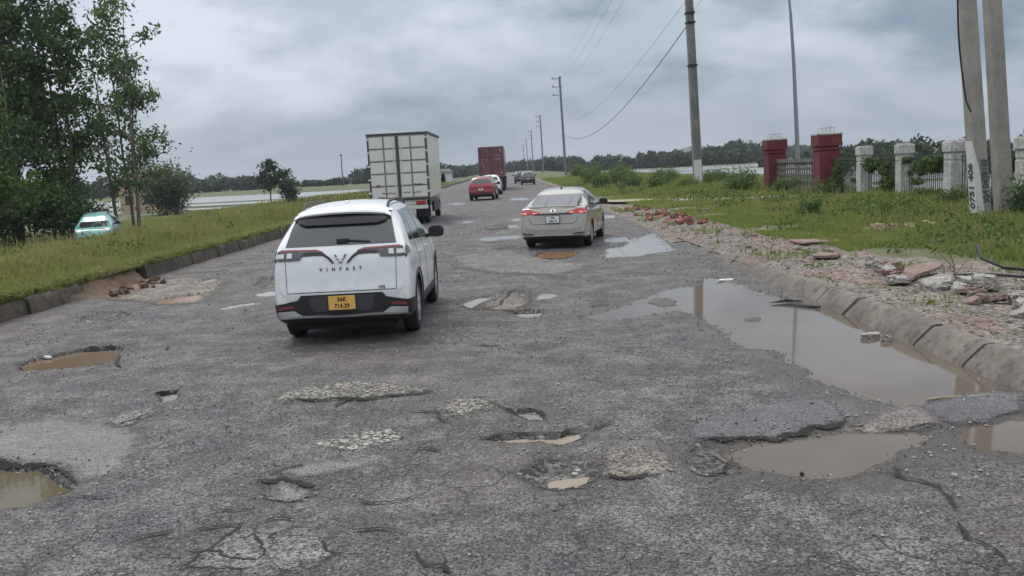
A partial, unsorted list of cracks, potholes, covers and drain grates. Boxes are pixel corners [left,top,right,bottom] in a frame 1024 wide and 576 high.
crack [117,508,295,569]
pothole [517,454,605,490]
pothole [492,432,586,446]
pothole [0,467,74,510]
pothole [157,391,180,402]
crack [888,466,1006,559]
pothole [510,410,547,421]
pothole [455,290,533,310]
pothole [17,345,124,371]
